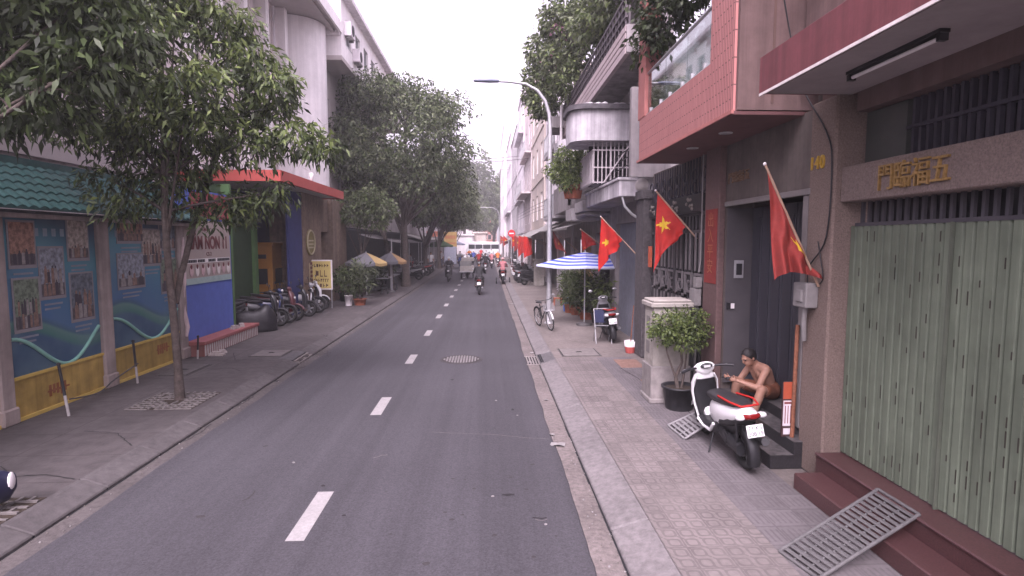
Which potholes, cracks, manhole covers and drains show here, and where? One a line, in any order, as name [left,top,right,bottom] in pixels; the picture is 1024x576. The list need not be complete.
manhole cover [440,355,483,364]
drain grate [279,351,313,364]
drain grate [524,352,556,365]
manhole cover [558,348,602,356]
